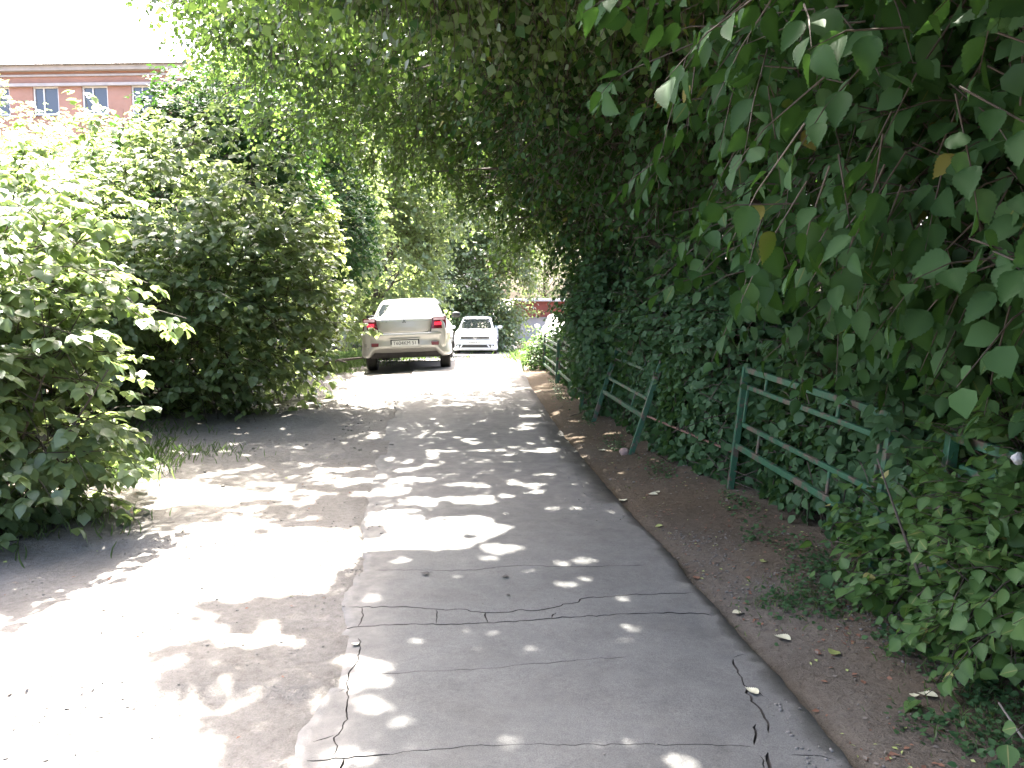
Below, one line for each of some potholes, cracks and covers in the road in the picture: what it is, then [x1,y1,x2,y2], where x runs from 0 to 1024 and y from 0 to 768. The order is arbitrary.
crack [310,593,772,768]
